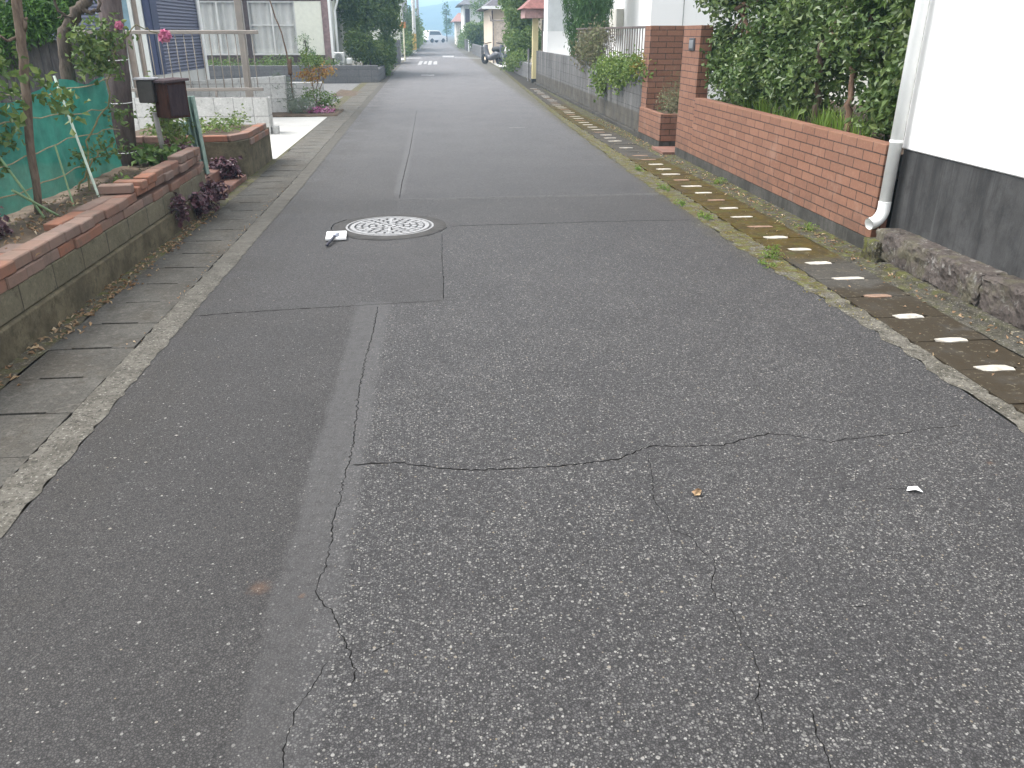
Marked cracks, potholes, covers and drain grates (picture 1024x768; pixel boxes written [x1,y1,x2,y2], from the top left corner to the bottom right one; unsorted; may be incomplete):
crack [282,307,963,768]
manhole cover [333,215,446,240]
